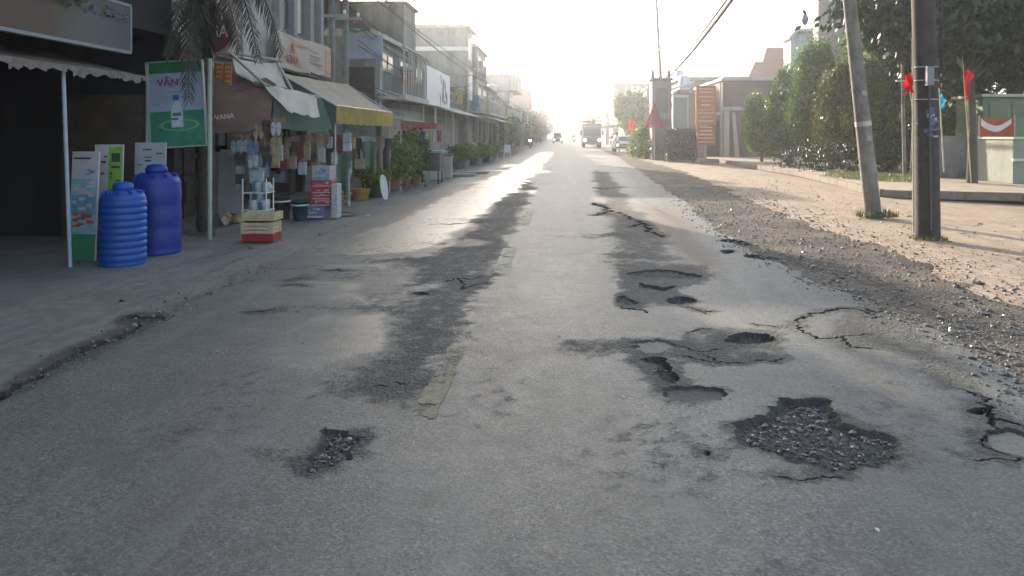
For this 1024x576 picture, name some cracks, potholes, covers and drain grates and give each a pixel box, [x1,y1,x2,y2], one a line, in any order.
pothole [626,269,702,279]
pothole [118,314,166,324]
pothole [724,332,776,344]
pothole [615,295,640,305]
pothole [665,296,697,304]
pothole [302,427,366,474]
crack [957,388,1024,462]
crack [750,308,892,349]
pothole [730,397,902,472]
pothole [0,324,142,401]
pothole [662,385,729,402]
pothole [639,356,680,384]
